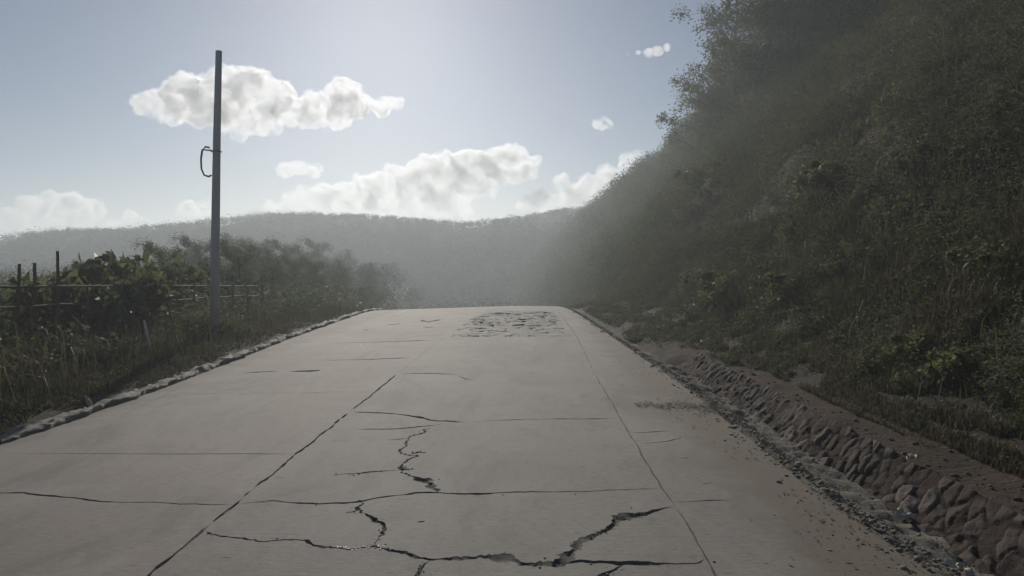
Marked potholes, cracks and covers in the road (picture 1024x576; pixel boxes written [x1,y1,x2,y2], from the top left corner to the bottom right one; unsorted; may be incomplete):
crack [7,412,704,576]
